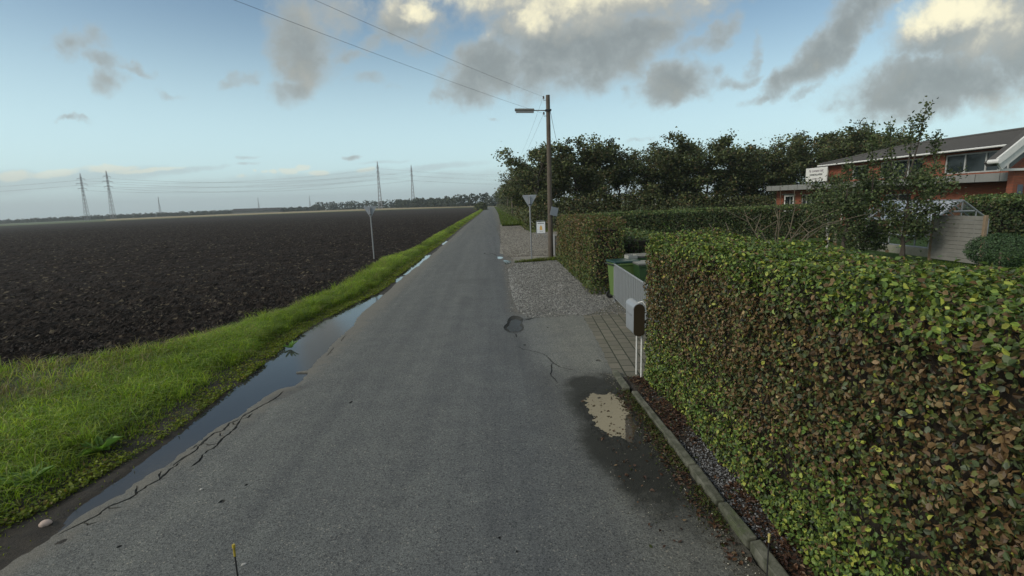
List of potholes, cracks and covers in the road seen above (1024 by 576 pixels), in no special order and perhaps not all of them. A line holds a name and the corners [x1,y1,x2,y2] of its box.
pothole [504,316,524,333]
crack [514,333,572,383]
crack [58,392,283,535]
